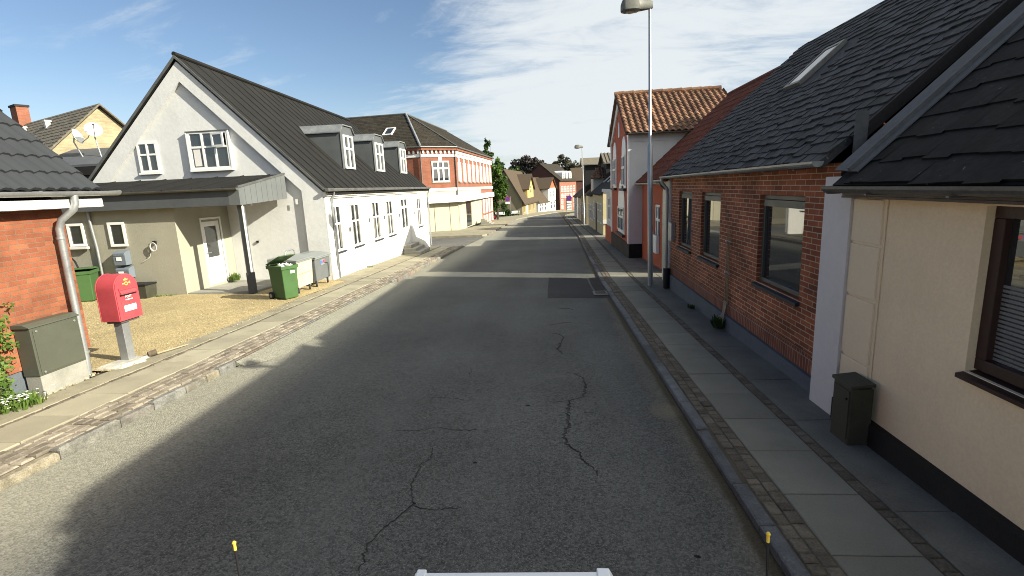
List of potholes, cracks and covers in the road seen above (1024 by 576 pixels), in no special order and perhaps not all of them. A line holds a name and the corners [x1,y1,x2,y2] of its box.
crack [358,427,477,573]
crack [552,373,598,476]
